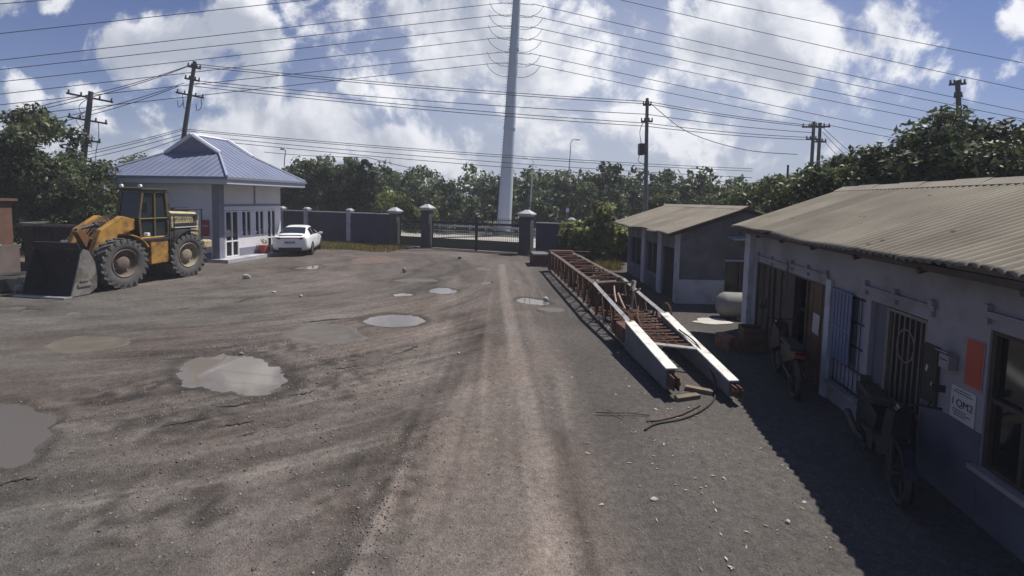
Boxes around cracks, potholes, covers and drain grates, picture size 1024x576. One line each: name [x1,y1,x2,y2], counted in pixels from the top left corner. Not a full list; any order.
crack [162,401,258,436]
pothole [175,354,288,396]
pothole [363,315,426,327]
pothole [0,403,57,468]
